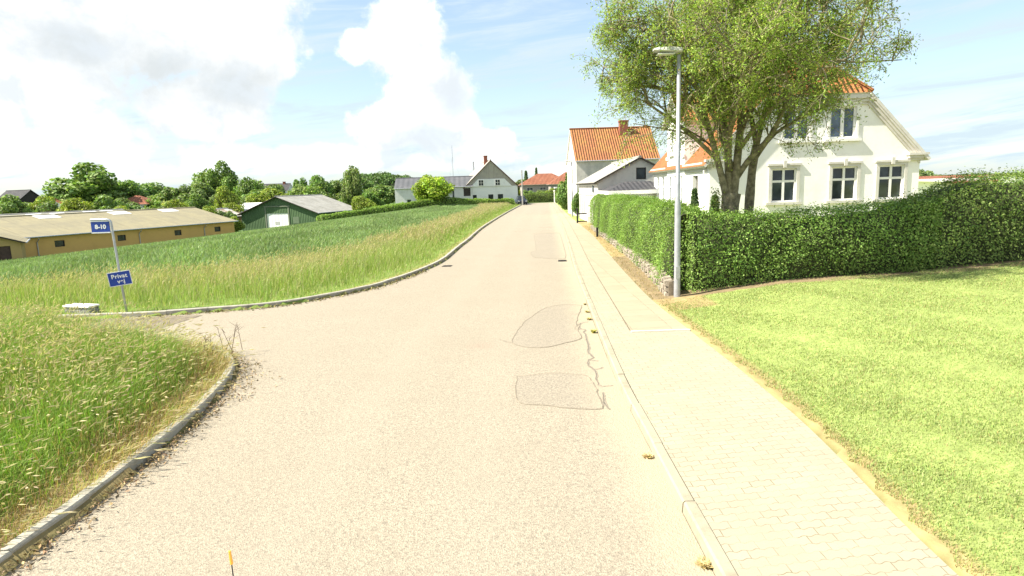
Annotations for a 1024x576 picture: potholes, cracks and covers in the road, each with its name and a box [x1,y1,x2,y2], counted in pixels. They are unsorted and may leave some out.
crack [574,322,613,387]
